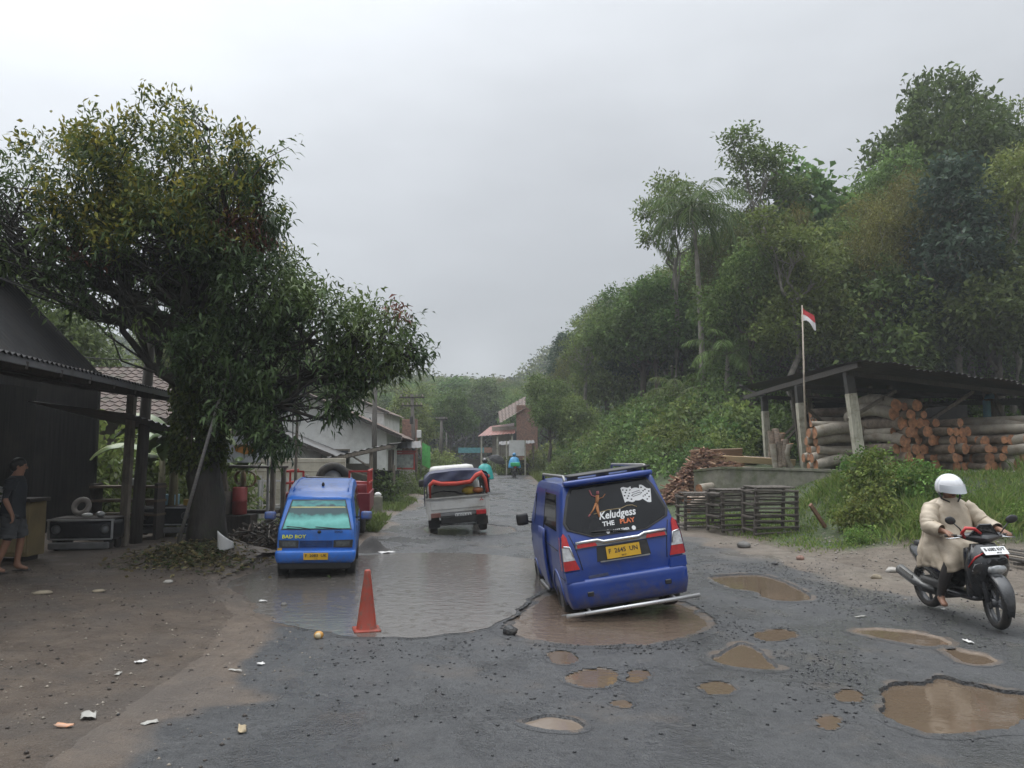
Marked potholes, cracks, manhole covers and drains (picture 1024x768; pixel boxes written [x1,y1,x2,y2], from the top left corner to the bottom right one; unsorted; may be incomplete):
pothole [693,679,740,696]
pothole [811,713,848,730]
pothole [829,687,868,704]
pothole [617,668,655,683]
pothole [208,549,554,639]
pothole [488,589,730,649]
pothole [702,572,820,603]
pothole [934,645,1008,667]
pothole [747,627,804,642]
pothole [557,665,629,689]
pothole [698,640,791,673]
pothole [606,698,636,708]
